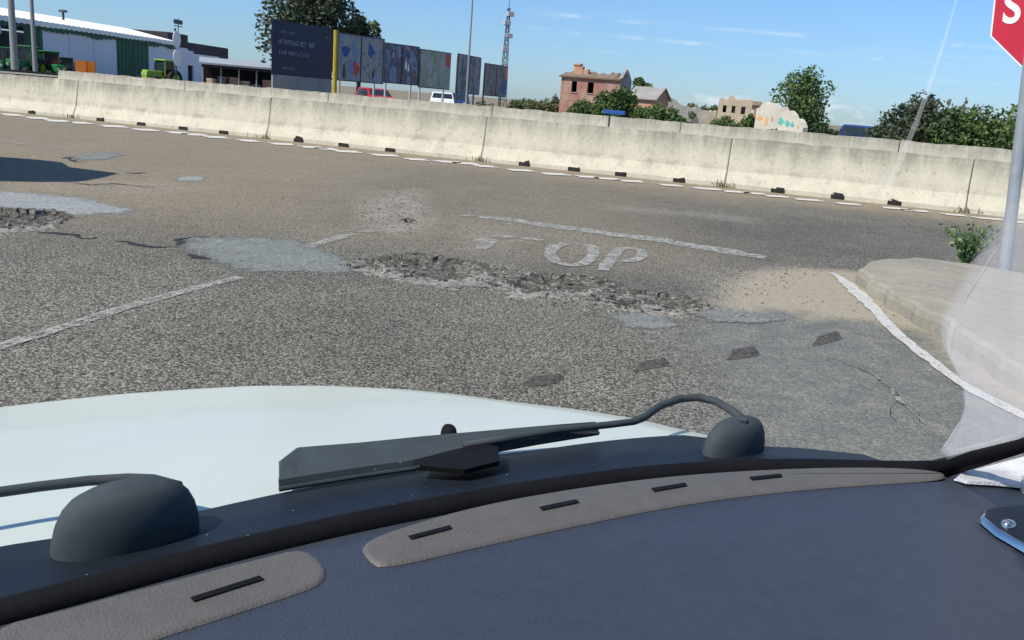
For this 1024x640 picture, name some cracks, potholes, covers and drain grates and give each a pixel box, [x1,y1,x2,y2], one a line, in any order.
pothole [0,206,75,236]
pothole [489,272,624,300]
pothole [587,288,714,319]
pothole [339,252,502,290]
crack [842,361,925,425]
